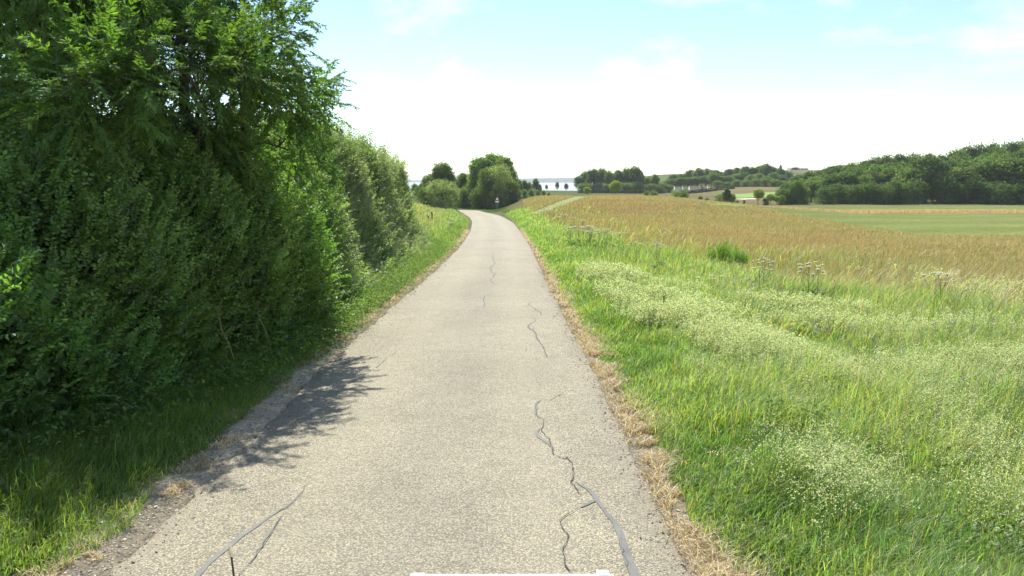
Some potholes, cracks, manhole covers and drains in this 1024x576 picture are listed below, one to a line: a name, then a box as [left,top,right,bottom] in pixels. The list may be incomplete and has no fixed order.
crack [534,392,640,576]
